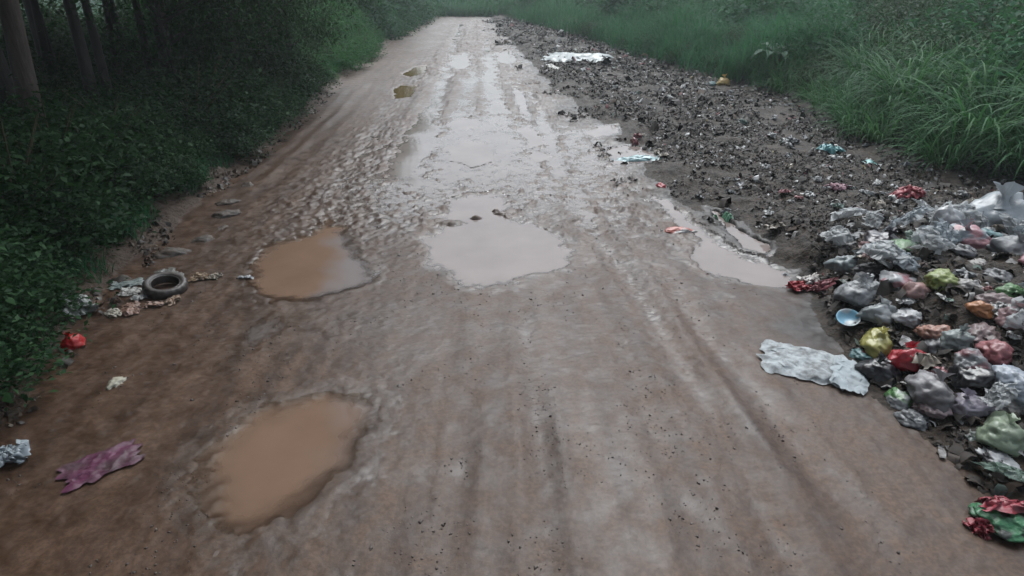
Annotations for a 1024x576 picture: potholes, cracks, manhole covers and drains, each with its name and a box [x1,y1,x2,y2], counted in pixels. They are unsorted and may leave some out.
pothole [389,84,423,99]
pothole [233,214,390,310]
pothole [155,375,405,576]
pothole [399,64,431,79]
pothole [412,189,583,294]
